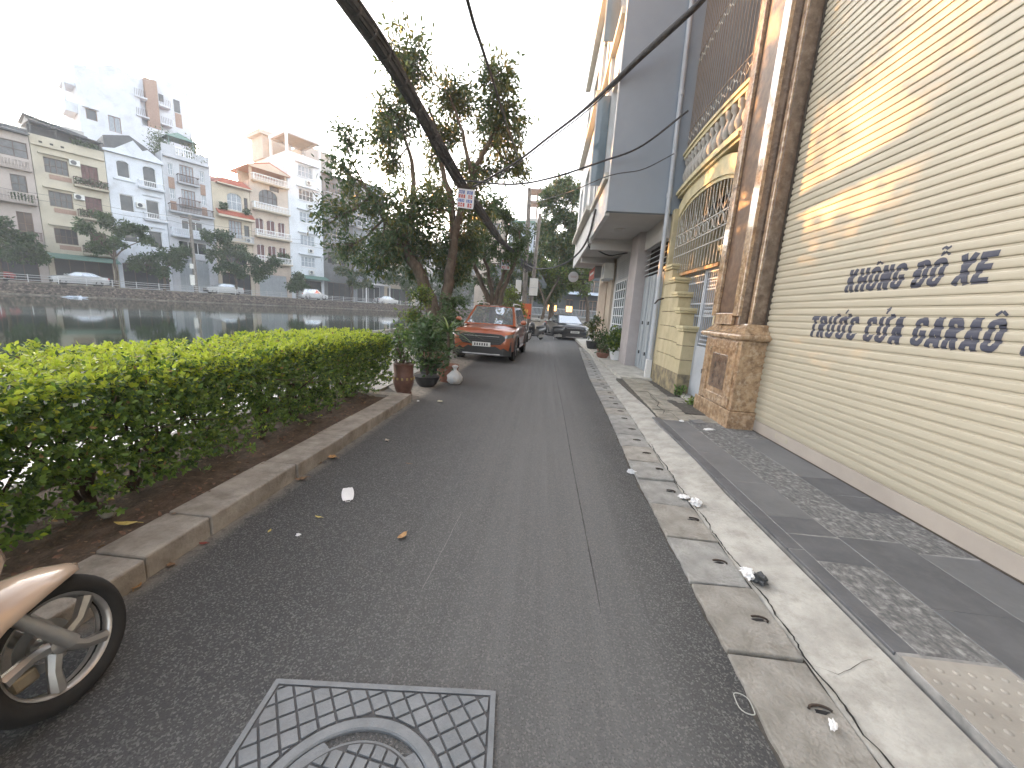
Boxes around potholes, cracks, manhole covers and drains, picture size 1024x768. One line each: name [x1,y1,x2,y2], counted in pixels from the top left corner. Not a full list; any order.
manhole cover [219,679,496,768]
